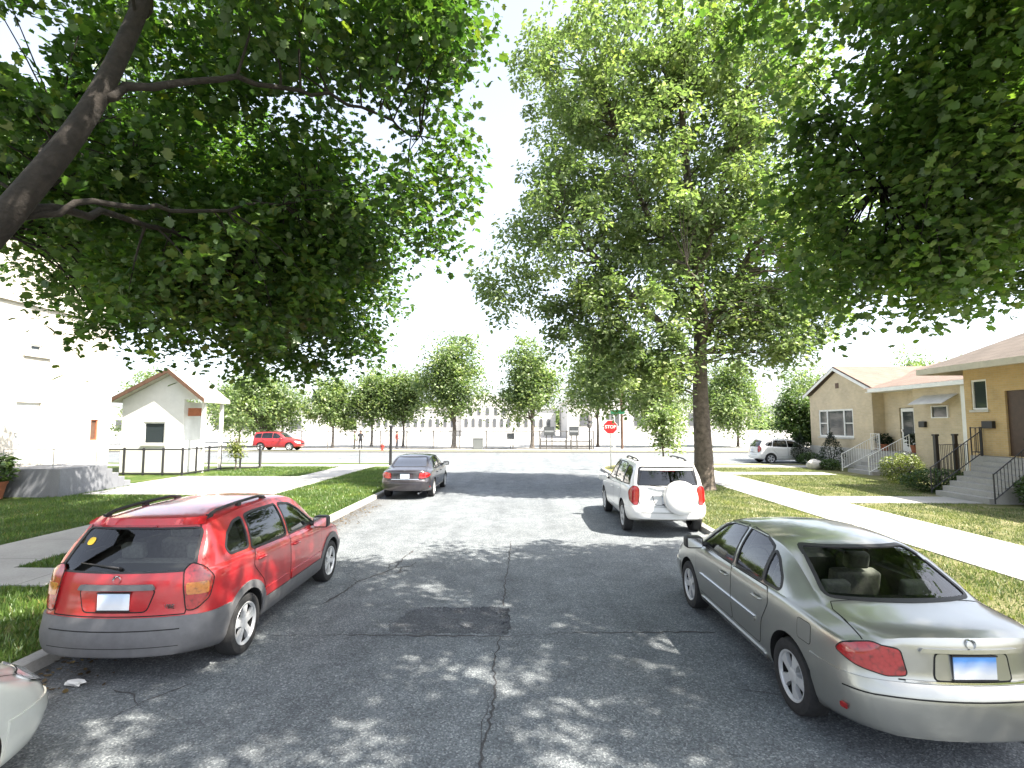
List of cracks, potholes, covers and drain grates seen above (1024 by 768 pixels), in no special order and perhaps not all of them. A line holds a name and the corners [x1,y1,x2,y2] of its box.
crack [272,541,715,768]
